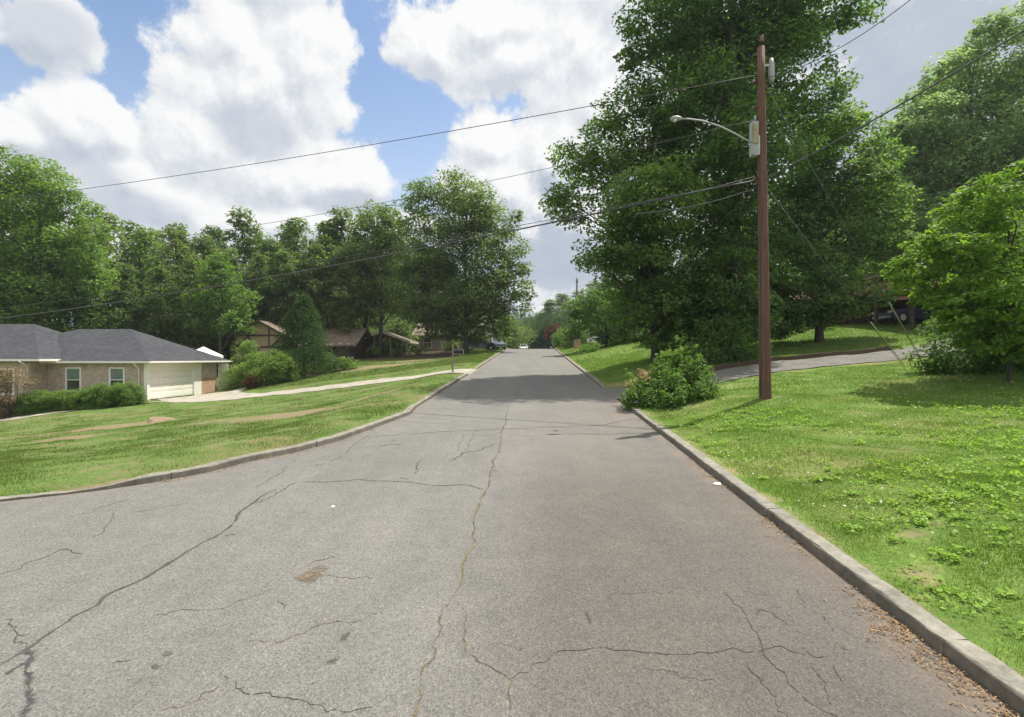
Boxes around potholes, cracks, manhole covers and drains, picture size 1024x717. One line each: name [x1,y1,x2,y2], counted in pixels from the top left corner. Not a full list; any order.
crack [0,461,295,717]
crack [319,384,854,717]
crack [150,667,369,716]
